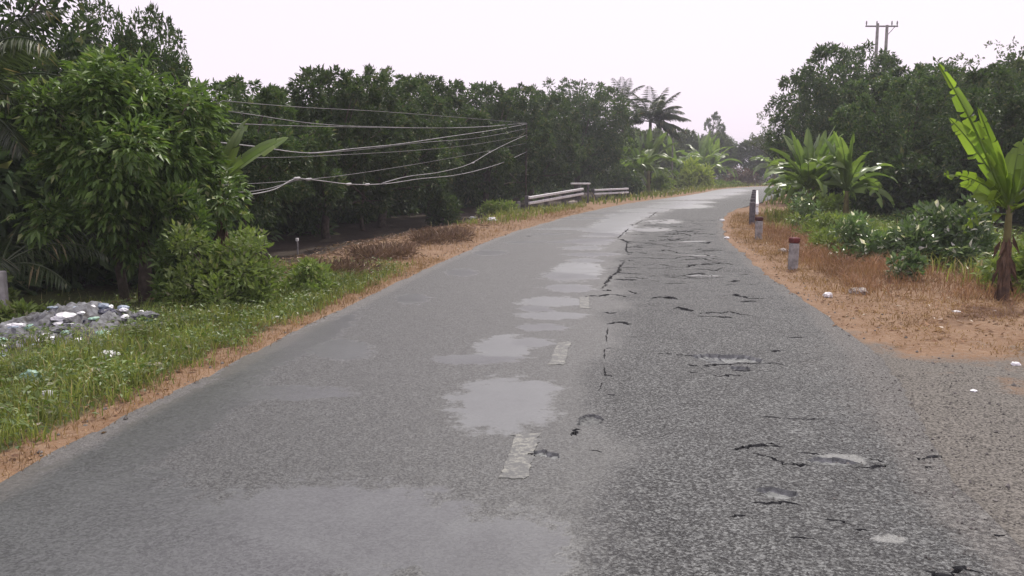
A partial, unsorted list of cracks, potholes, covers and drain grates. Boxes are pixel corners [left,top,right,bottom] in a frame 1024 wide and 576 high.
pothole [806,457,885,469]
crack [790,518,871,540]
crack [599,312,629,396]
crack [917,455,942,468]
crack [731,442,882,467]
crack [923,565,983,576]
crack [609,220,762,318]
pothole [753,487,799,505]
pothole [676,354,787,367]
